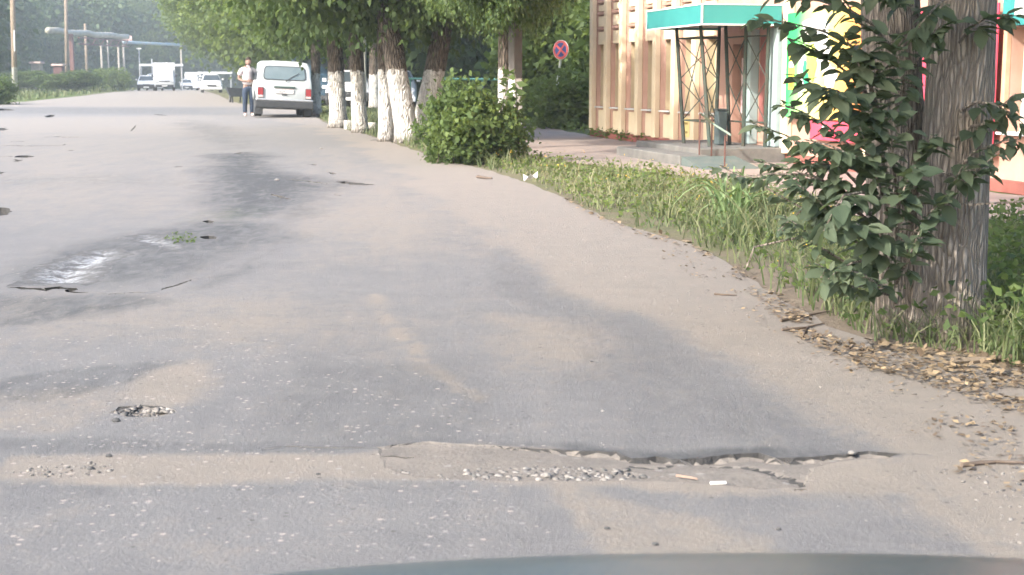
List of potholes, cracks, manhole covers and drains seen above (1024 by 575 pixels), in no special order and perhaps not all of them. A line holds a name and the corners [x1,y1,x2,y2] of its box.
pothole [108,405,176,417]
pothole [7,248,135,287]
pothole [378,441,899,490]
pothole [123,233,186,251]
